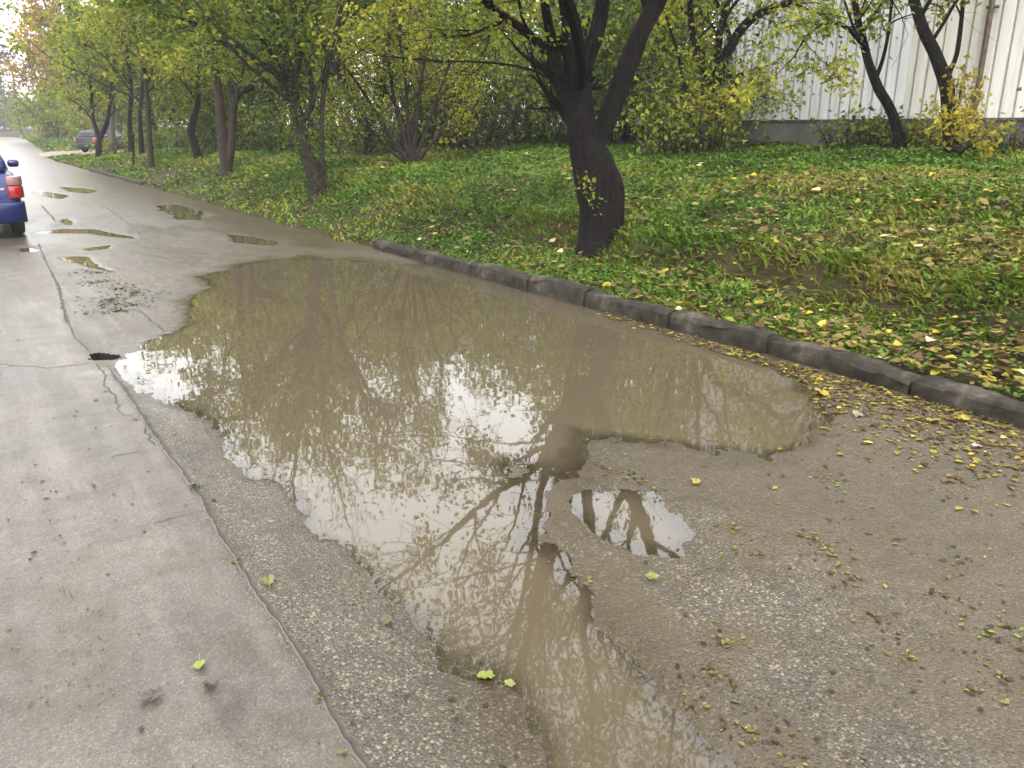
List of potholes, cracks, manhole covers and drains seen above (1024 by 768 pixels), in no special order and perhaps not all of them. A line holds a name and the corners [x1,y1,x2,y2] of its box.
crack [0,204,373,768]
pothole [87,353,121,361]
pothole [25,227,141,240]
pothole [112,256,839,768]
pothole [54,254,114,271]
pothole [220,233,287,246]
pothole [152,204,210,220]
